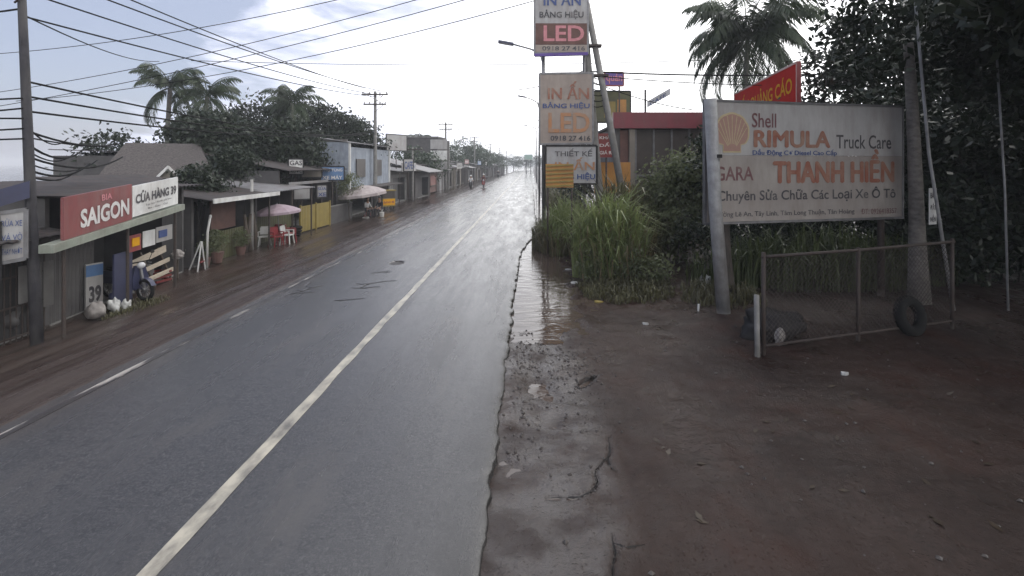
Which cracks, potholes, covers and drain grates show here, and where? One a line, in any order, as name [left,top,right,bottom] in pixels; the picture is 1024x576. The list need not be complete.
crack [612,536,645,576]
crack [554,437,614,498]
